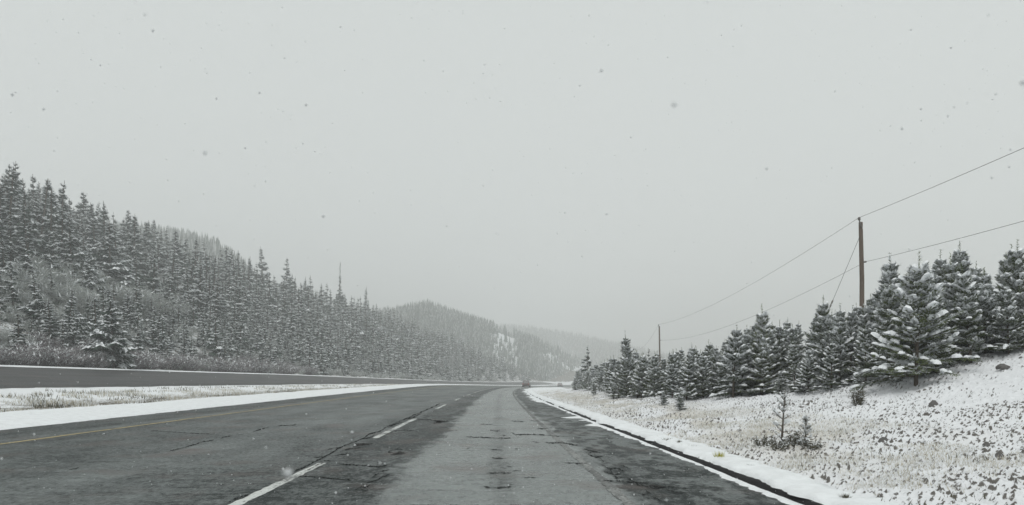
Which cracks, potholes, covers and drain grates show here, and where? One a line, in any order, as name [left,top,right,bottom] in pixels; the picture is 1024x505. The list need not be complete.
crack [153,424,296,451]
crack [229,404,687,502]
